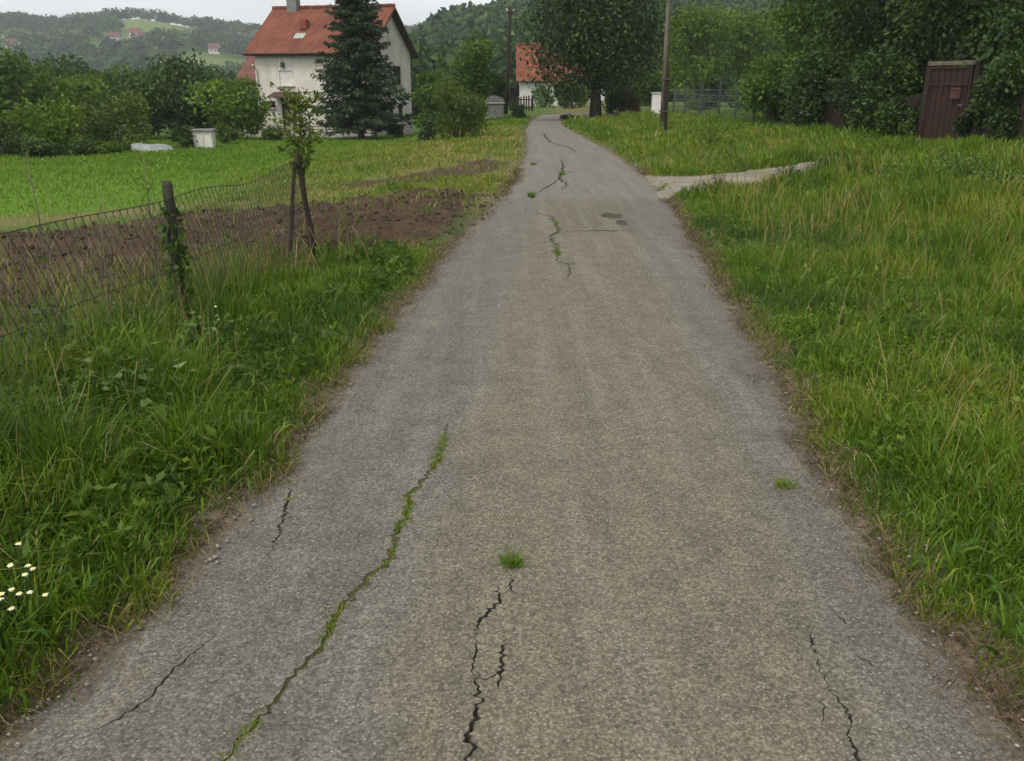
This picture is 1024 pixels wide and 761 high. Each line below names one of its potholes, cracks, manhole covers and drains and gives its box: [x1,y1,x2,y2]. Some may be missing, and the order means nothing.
crack [536,211,632,279]
crack [462,578,514,761]
crack [223,424,448,761]
crack [540,133,575,192]
crack [809,610,875,761]
crack [87,632,218,737]
